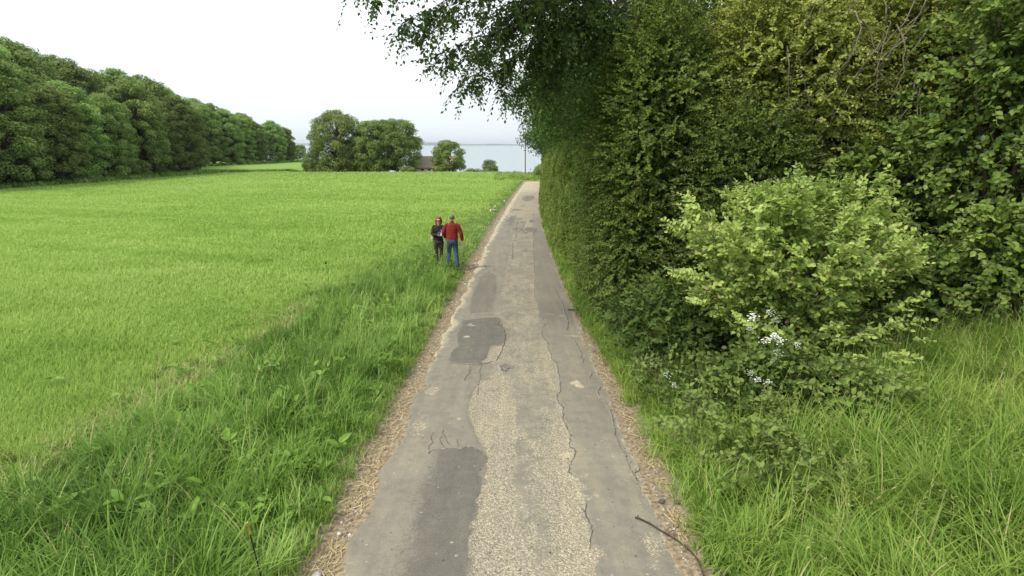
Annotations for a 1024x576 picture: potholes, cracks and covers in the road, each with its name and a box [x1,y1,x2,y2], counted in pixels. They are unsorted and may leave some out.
crack [428,430,486,456]
crack [583,497,593,544]
crack [449,322,506,392]
pothole [497,362,520,374]
crack [512,222,642,489]
